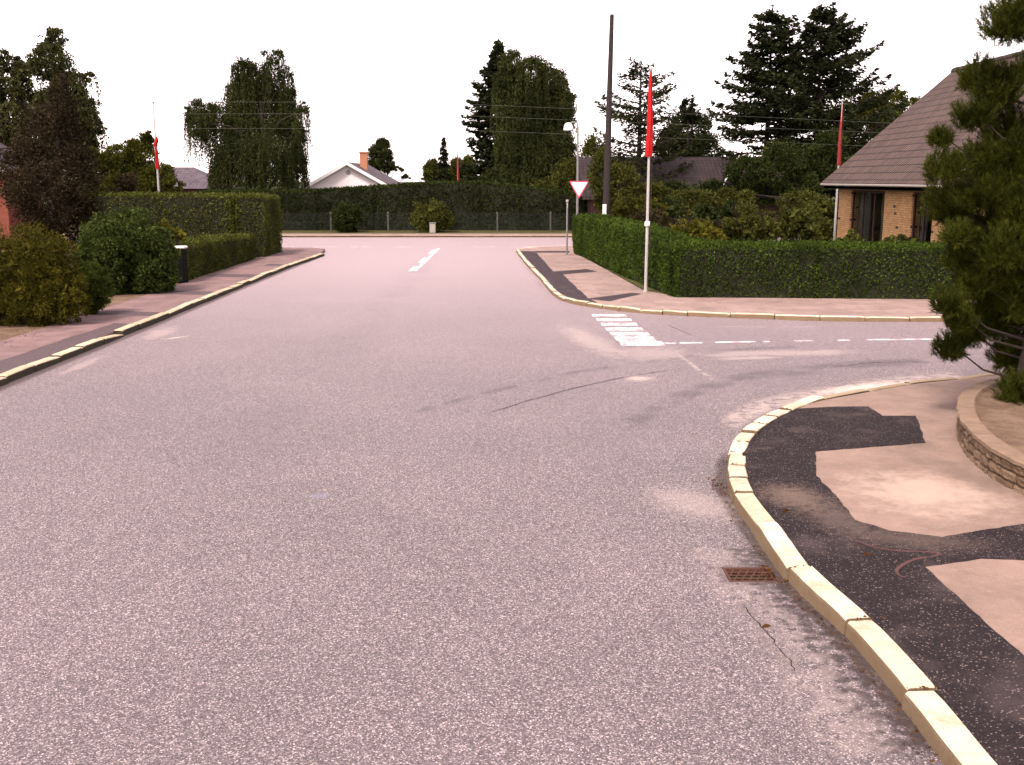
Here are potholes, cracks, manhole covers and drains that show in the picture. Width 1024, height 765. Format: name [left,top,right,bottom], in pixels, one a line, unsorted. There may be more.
drain grate [722,567,778,582]
crack [742,603,796,673]
